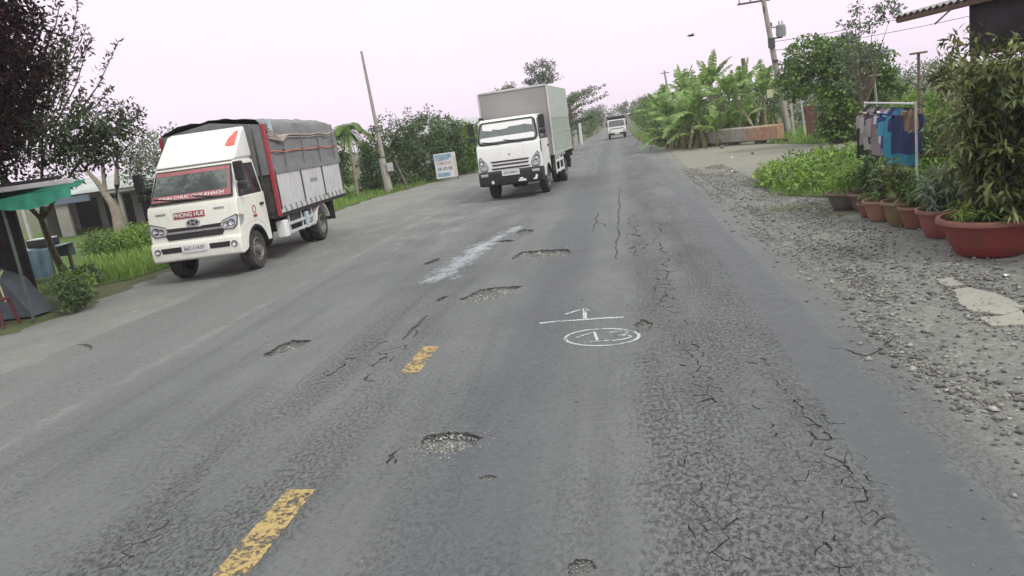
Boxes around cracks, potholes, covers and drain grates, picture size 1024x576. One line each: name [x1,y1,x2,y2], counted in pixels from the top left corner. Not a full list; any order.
crack [310,315,428,387]
pothole [404,424,495,461]
pothole [503,247,592,260]
crack [386,447,402,464]
crack [743,358,892,576]
pothole [458,281,542,307]
crack [682,427,753,574]
pothole [632,319,655,332]
crack [830,331,894,356]
pothole [567,556,605,575]
crack [592,188,723,403]
pothole [237,335,315,362]
